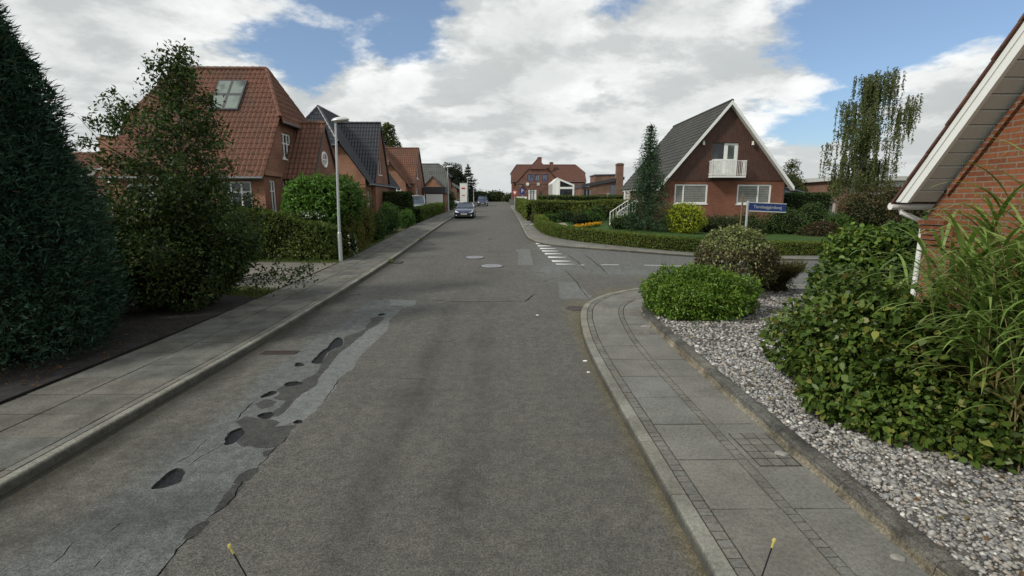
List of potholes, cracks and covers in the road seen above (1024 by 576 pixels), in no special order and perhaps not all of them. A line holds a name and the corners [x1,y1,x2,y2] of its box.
pothole [312,337,343,364]
pothole [224,427,245,445]
crack [17,522,123,572]
pothole [151,468,185,489]
